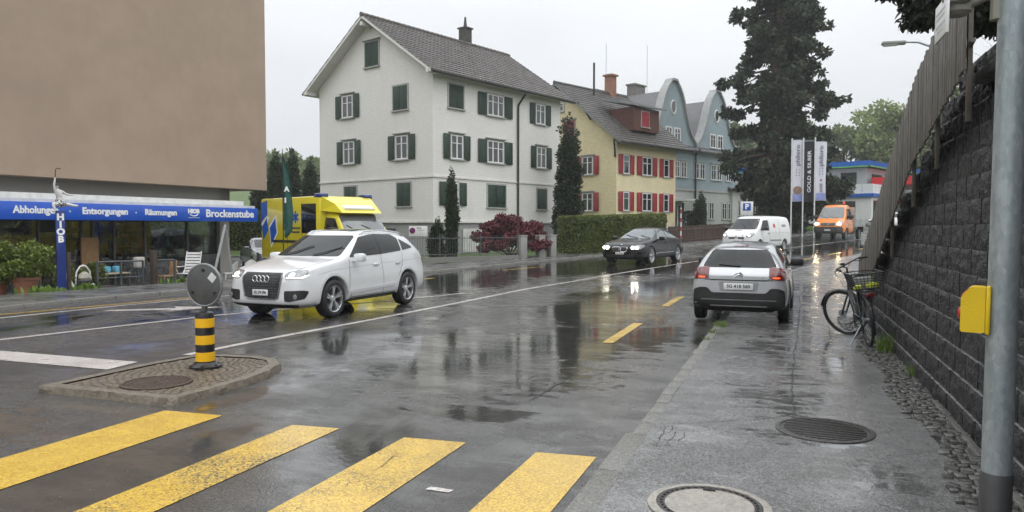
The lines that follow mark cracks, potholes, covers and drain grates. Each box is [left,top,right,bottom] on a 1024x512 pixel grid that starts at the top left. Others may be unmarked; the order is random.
manhole cover [648,484,773,512]
manhole cover [775,417,876,444]
manhole cover [119,375,193,391]
